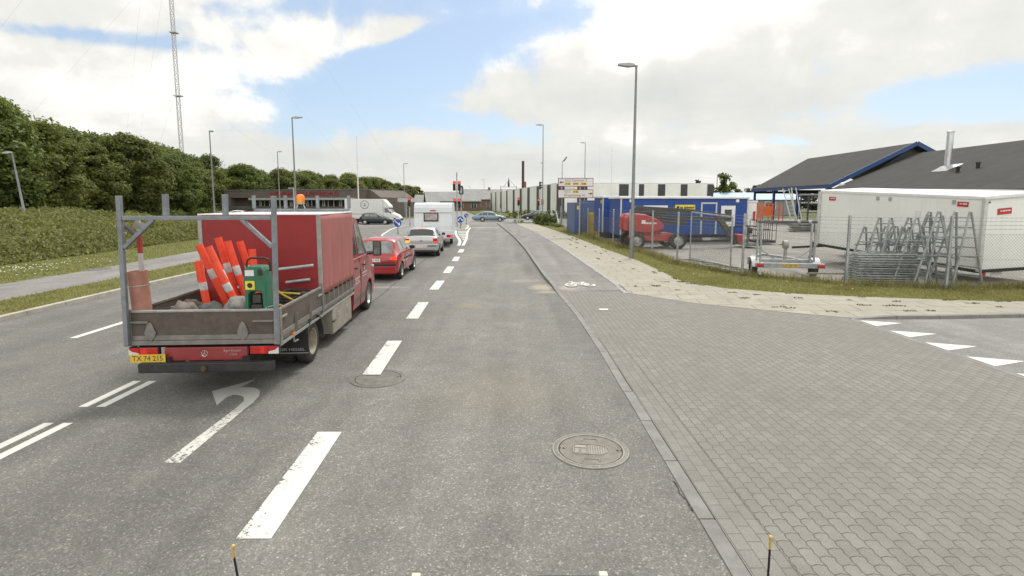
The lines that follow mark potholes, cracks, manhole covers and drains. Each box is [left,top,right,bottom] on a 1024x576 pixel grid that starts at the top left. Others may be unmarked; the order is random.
manhole cover [350,369,406,388]
manhole cover [552,433,630,470]
